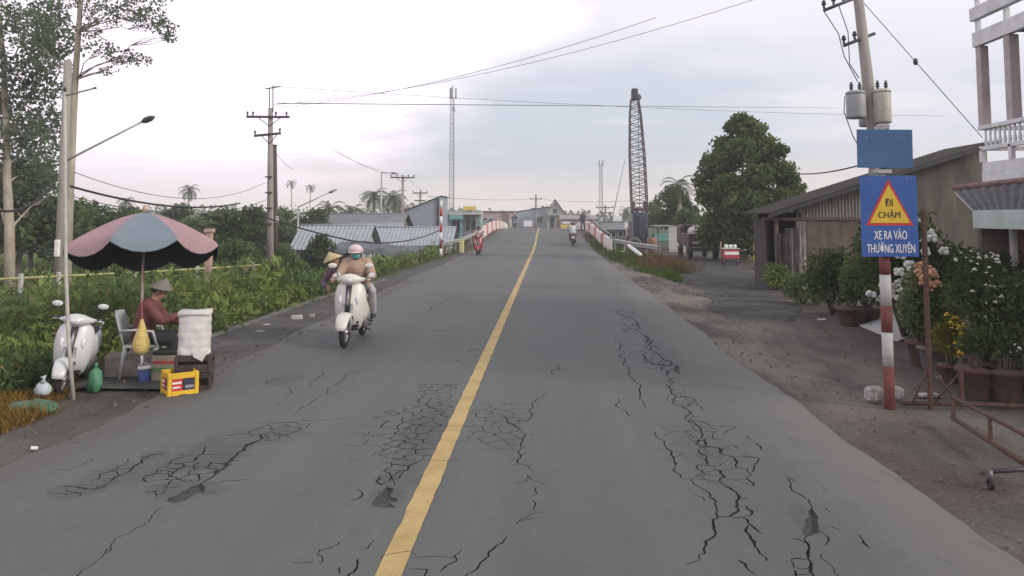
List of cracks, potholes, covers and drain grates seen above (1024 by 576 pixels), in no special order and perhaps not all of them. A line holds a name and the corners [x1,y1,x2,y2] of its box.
pothole [801,506,820,536]
crack [52,370,357,576]
pothole [166,484,205,503]
pothole [372,487,398,508]
crack [294,384,547,576]
crack [614,309,768,575]
crack [787,477,839,576]
